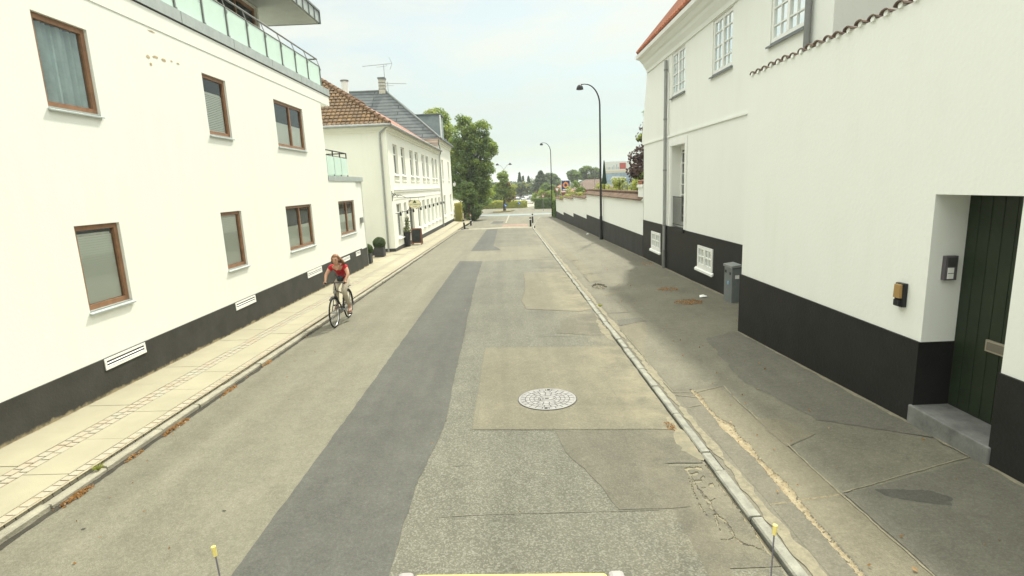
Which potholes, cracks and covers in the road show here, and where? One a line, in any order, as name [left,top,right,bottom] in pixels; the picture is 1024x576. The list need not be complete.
crack [441,298,935,576]
manhole cover [518,388,577,410]
